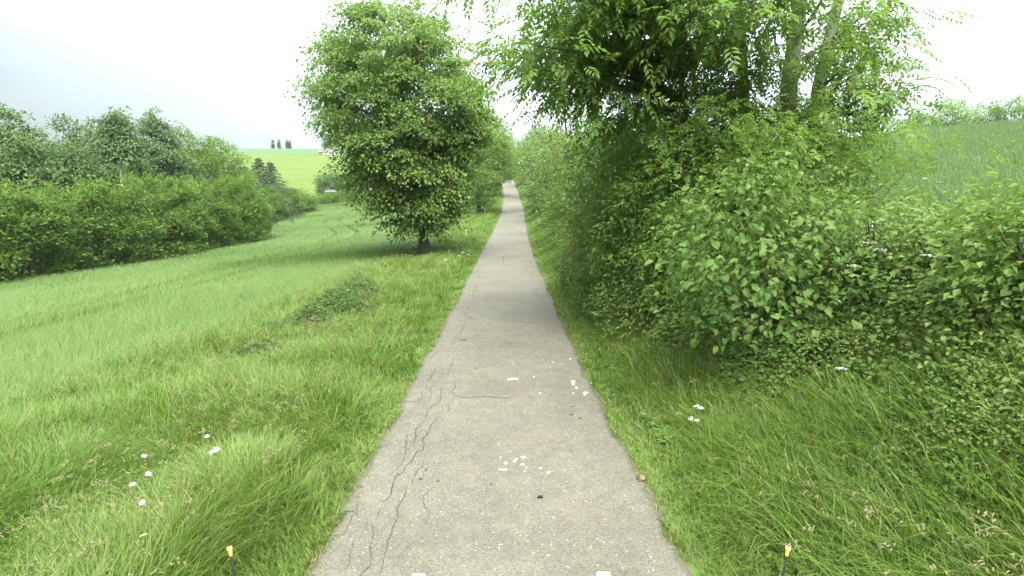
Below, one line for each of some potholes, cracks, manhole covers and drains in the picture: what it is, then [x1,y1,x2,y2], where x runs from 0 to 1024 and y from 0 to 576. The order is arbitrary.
crack [333,278,480,575]
